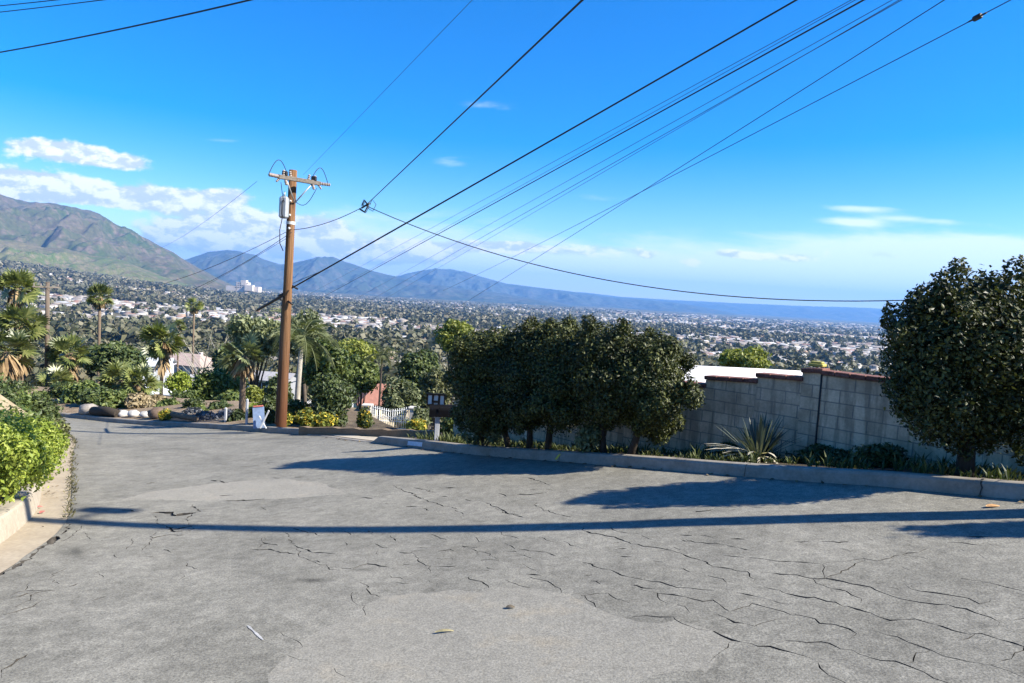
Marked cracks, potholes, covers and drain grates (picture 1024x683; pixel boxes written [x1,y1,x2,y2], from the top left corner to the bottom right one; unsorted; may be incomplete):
crack [252,478,1024,683]
